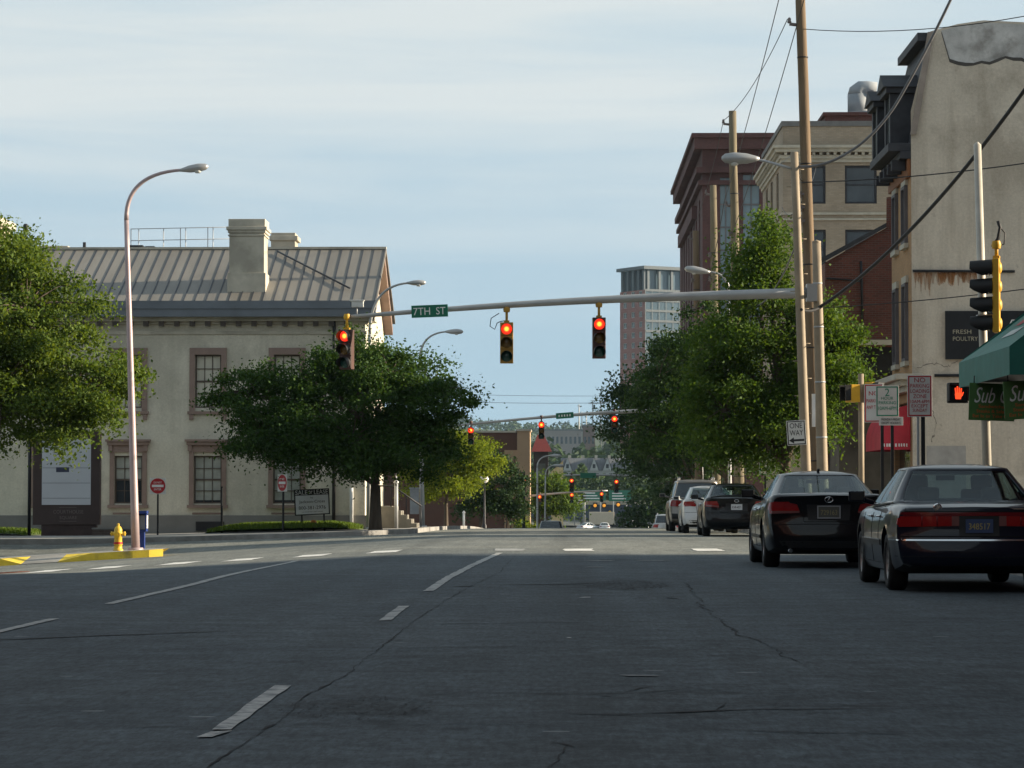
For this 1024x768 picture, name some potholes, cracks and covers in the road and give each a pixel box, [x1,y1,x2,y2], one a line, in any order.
crack [0,622,596,653]
crack [505,580,800,663]
